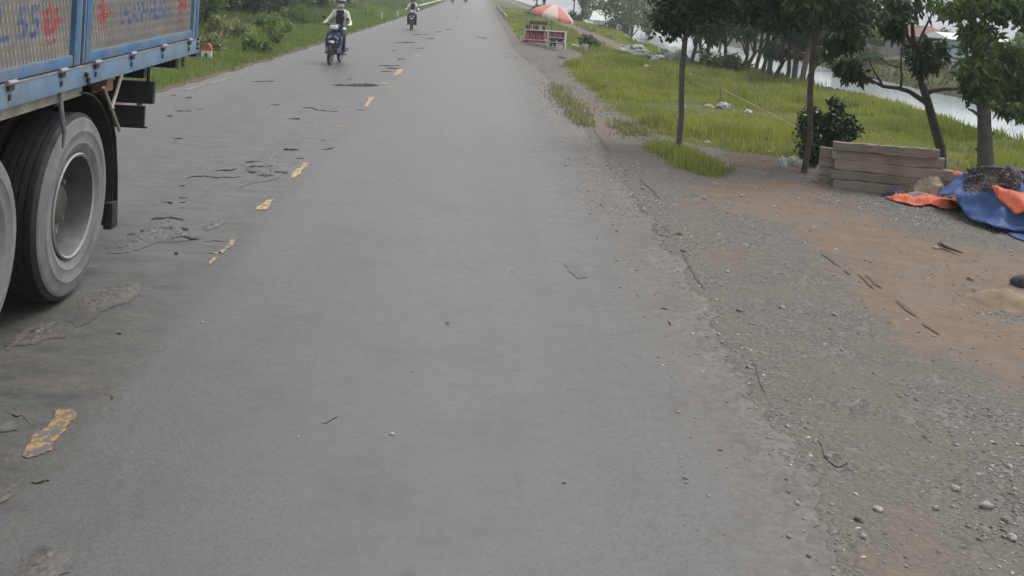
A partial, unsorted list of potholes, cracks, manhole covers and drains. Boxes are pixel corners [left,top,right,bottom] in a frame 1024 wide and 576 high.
crack [126,148,304,242]
